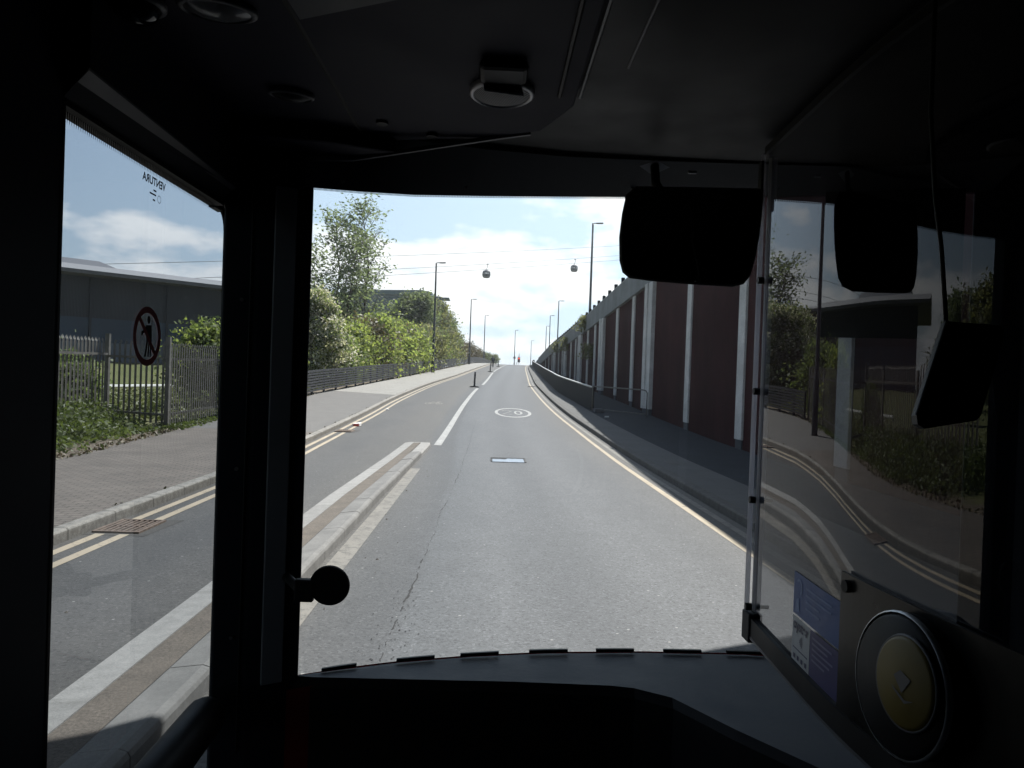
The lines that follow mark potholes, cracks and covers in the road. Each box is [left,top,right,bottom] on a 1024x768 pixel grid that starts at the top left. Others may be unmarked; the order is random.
drain grate [82,518,184,536]
crack [358,428,474,665]
